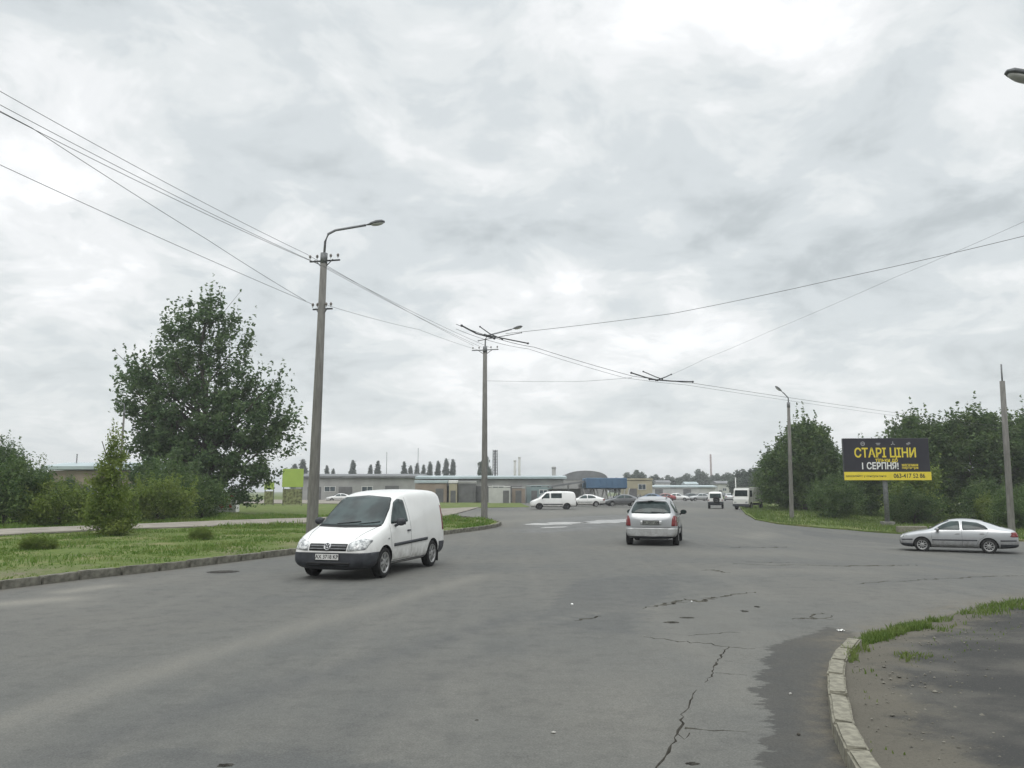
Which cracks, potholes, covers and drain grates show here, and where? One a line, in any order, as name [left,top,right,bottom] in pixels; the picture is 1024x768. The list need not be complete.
crack [651,632,755,768]
crack [645,592,755,608]
